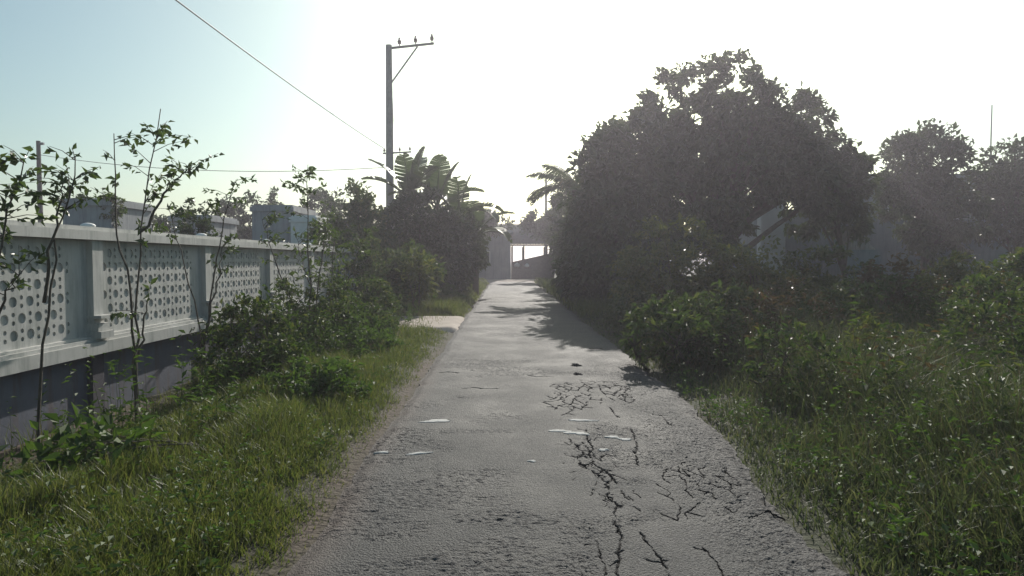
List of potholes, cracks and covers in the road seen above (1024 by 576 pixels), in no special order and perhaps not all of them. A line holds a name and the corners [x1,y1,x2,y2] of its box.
crack [528,375,786,576]
